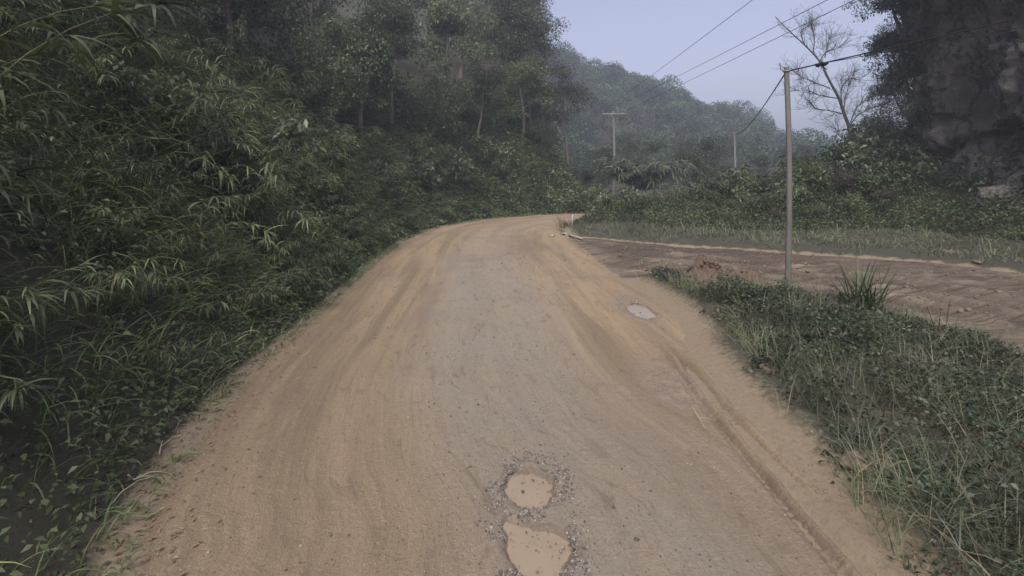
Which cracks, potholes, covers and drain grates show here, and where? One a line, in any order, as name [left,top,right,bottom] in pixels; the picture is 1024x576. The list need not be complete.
pothole [474,447,586,528]
pothole [467,495,612,576]
pothole [616,298,668,323]
